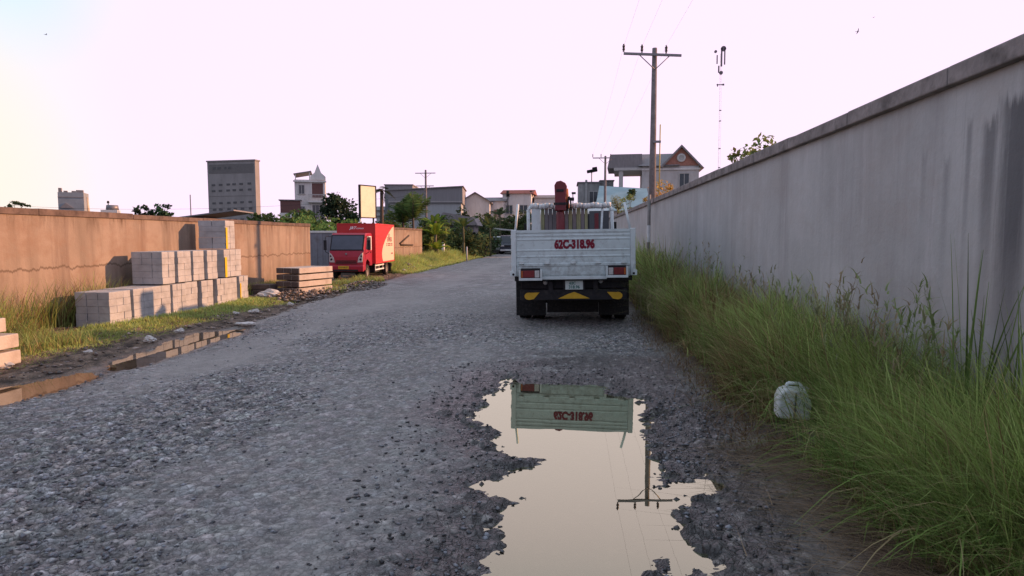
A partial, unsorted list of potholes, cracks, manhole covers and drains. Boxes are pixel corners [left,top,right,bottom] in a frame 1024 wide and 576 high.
pothole [422,368,778,576]
